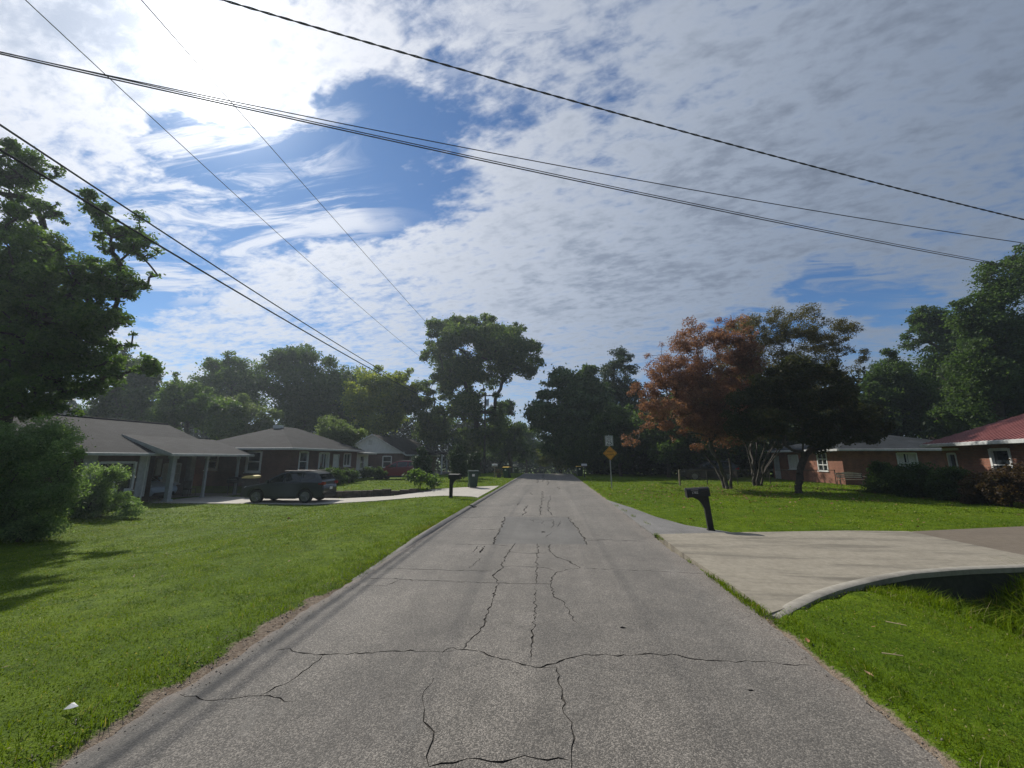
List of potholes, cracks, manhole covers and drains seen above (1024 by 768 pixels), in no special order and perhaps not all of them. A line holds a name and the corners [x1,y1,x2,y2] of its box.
crack [180,479,803,768]
